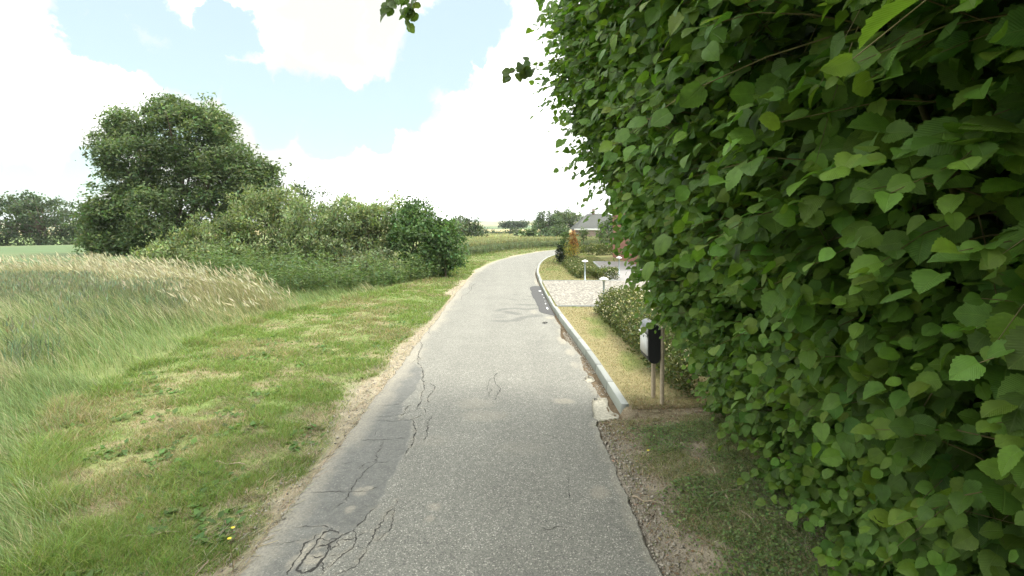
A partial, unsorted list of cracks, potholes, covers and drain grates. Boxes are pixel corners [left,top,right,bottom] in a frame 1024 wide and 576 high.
crack [282,332,435,574]
